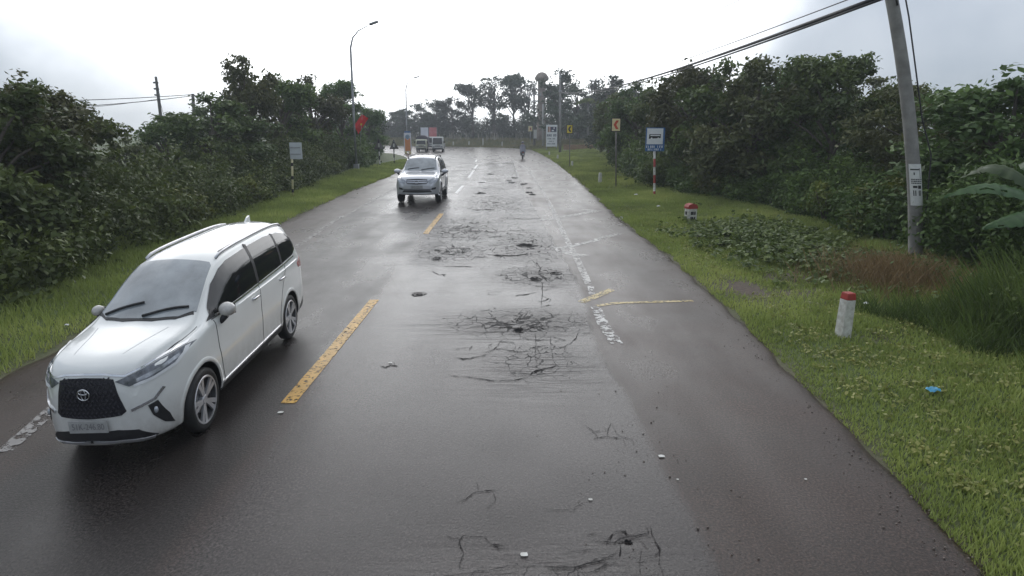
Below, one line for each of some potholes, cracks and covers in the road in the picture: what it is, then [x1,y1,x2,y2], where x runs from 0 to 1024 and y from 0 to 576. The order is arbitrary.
crack [423,201,586,381]
crack [448,527,663,576]
